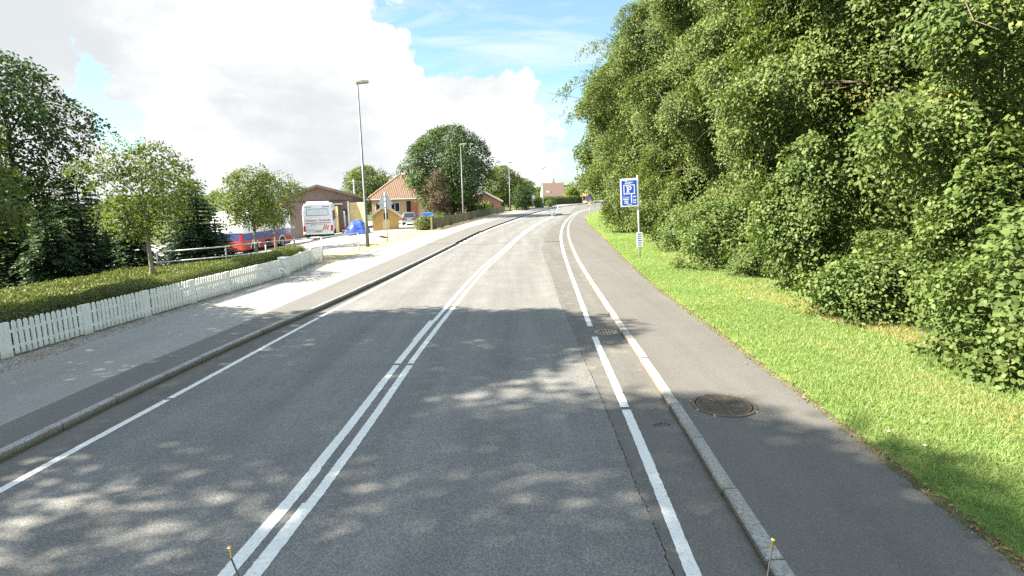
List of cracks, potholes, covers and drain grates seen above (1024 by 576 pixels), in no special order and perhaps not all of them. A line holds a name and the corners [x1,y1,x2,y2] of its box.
manhole cover [689,394,759,418]
